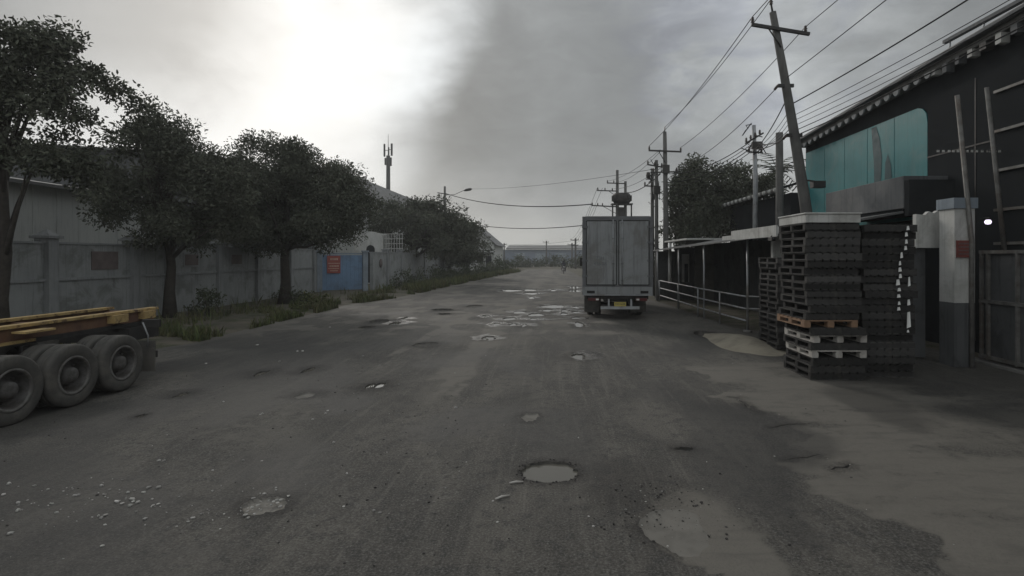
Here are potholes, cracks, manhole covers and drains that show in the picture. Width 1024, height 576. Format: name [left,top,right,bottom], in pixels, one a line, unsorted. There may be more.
pothole [520,413,539,422]
pothole [516,459,583,485]
pothole [241,497,287,515]
crack [784,454,850,470]
pothole [638,509,709,557]
